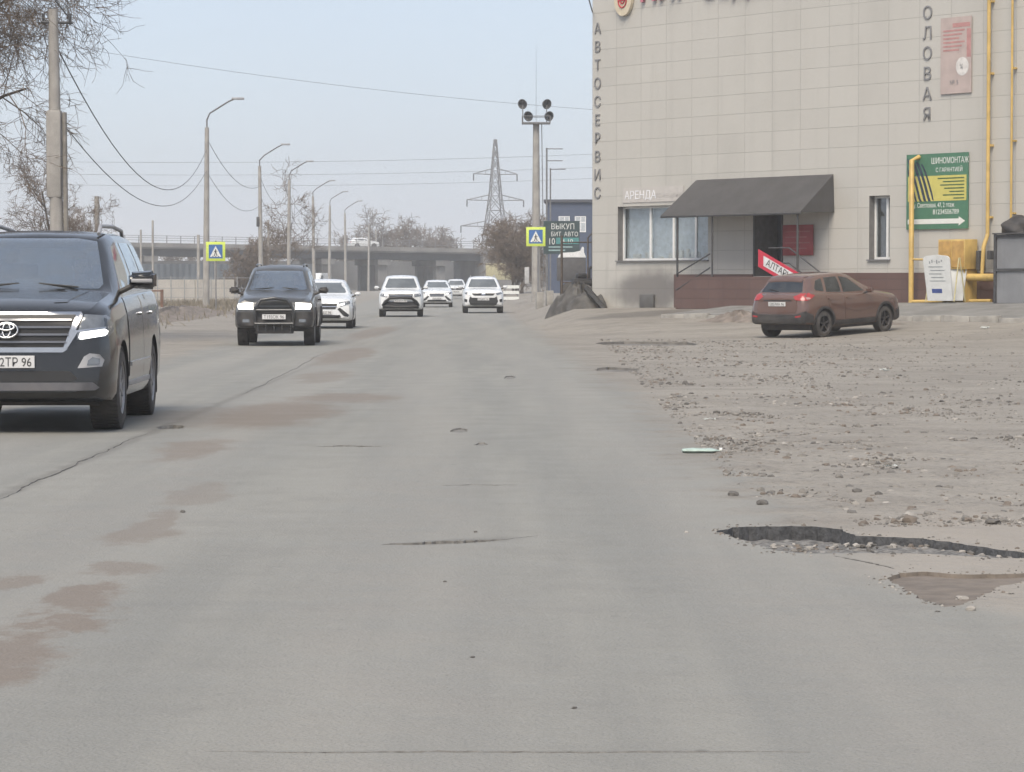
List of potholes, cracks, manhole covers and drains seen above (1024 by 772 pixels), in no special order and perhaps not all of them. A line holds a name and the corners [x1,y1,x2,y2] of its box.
pothole [717,526,1024,558]
pothole [888,572,1024,607]
crack [1,433,147,499]
crack [381,536,531,545]
